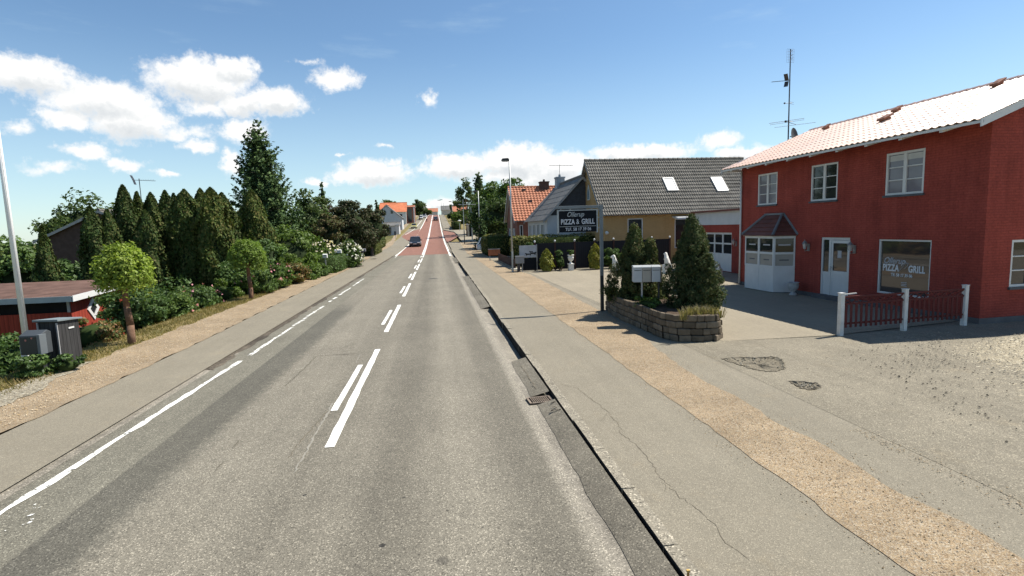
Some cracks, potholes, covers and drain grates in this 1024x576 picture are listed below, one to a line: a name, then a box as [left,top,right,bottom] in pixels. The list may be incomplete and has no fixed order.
crack [562,384,751,561]
drain grate [526,395,553,405]
pothole [722,356,786,371]
pothole [789,381,821,390]
